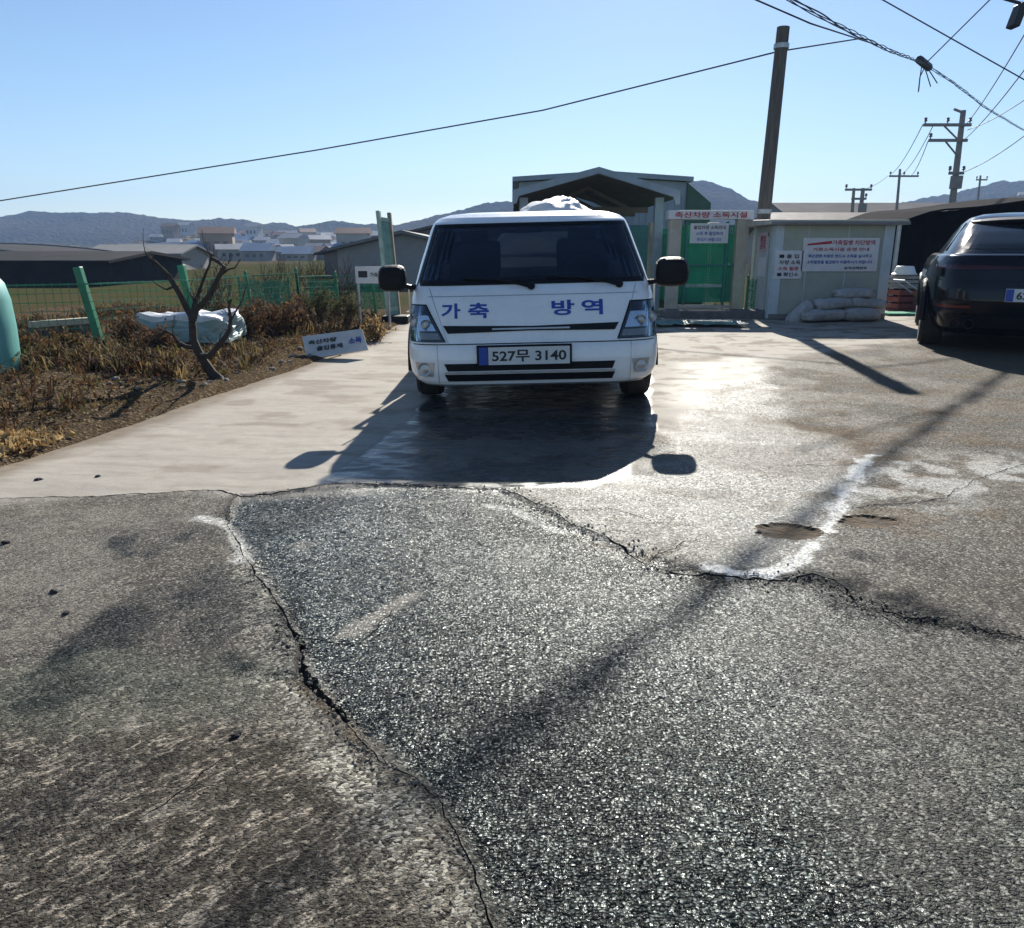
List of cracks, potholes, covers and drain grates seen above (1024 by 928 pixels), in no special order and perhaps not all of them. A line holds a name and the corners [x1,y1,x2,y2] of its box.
pothole [832,513,903,530]
pothole [750,522,830,542]
crack [118,463,1024,928]
